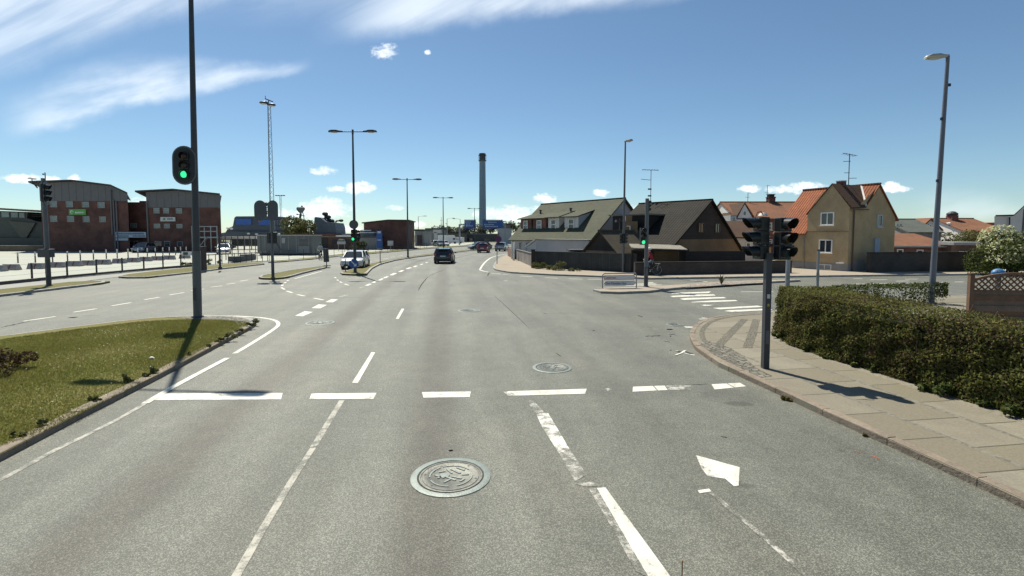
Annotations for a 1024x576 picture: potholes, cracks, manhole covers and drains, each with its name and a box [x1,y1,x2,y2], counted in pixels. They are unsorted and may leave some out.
manhole cover [410,458,491,498]
manhole cover [532,362,572,373]
